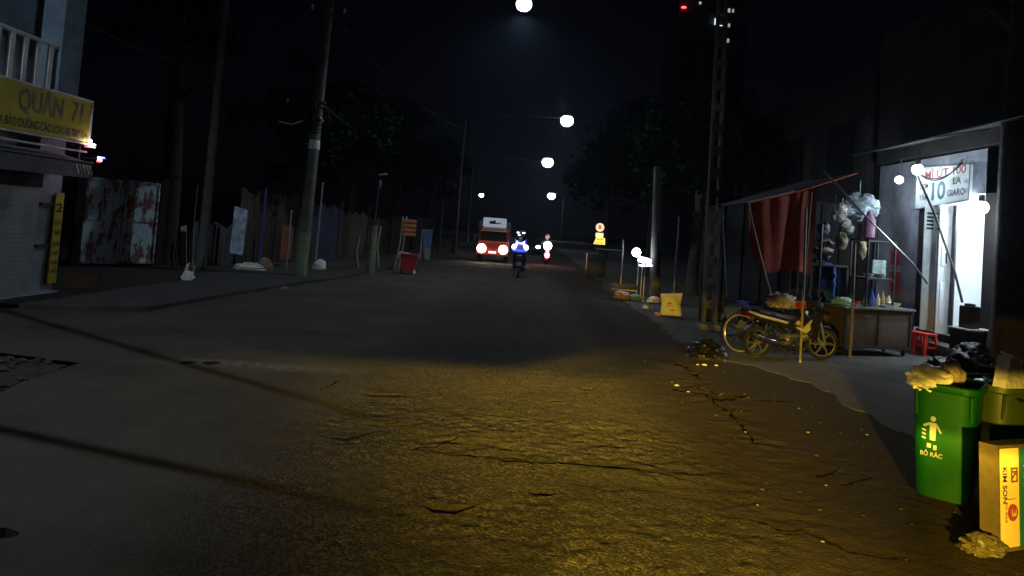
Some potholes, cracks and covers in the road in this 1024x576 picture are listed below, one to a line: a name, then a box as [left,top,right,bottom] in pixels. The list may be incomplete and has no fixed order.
crack [414,435,700,496]
pothole [0,527,19,538]
crack [648,358,799,444]
pothole [414,503,483,514]
